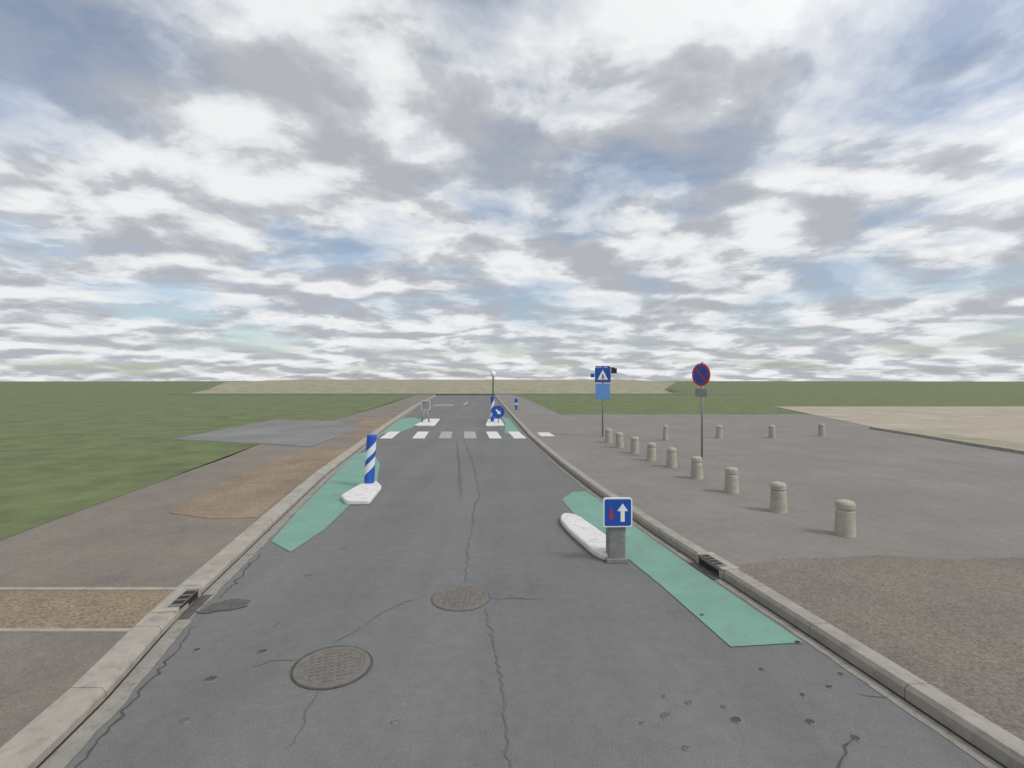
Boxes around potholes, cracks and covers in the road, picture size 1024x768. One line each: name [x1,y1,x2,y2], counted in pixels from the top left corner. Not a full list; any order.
manhole cover [290,645,373,690]
drain grate [689,552,739,579]
crack [74,627,192,768]
crack [286,692,318,748]
drain grate [151,587,211,619]
manhole cover [431,586,490,611]
crack [836,734,853,768]
crack [219,553,262,598]
